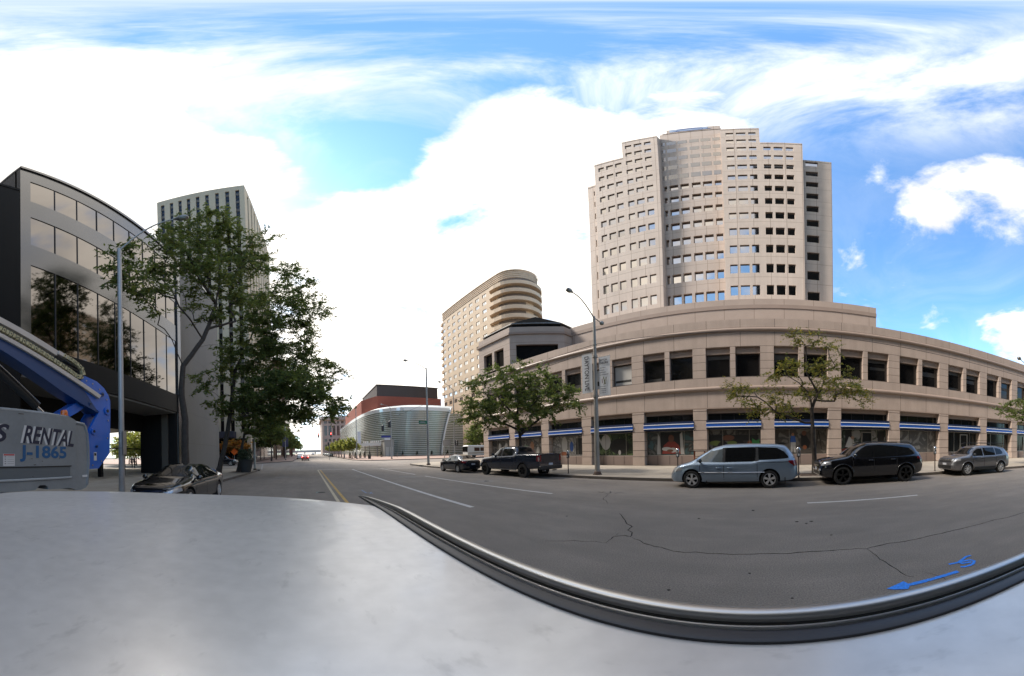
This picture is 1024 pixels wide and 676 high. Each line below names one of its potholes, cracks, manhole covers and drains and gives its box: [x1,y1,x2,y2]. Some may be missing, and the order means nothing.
crack [572,480,1024,577]
